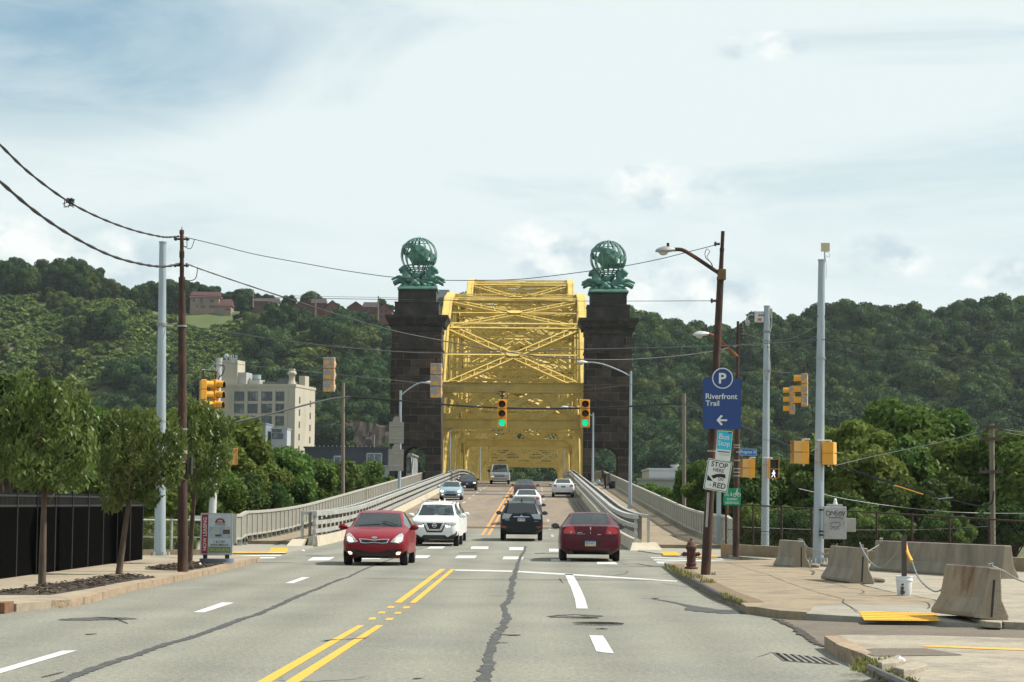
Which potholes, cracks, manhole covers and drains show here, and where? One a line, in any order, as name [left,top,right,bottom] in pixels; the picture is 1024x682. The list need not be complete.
drain grate [771,652,839,665]
